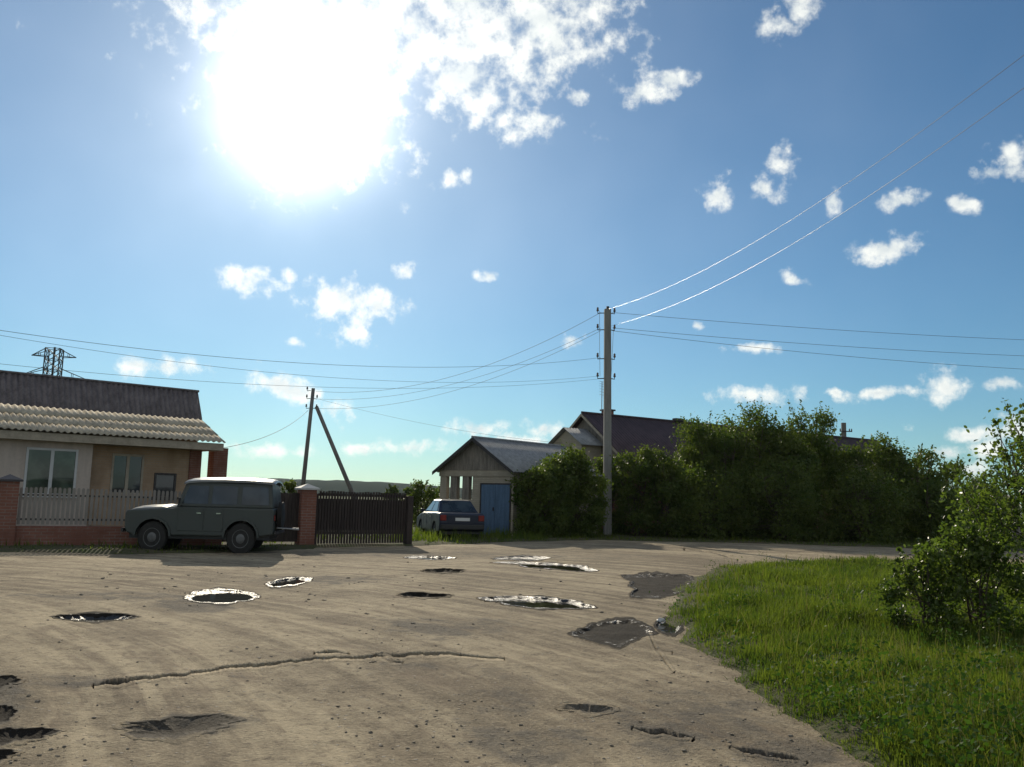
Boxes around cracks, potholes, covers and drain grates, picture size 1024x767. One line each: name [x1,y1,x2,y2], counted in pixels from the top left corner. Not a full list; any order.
pothole [182,586,262,606]
pothole [476,595,598,611]
crack [94,648,504,690]
pothole [0,700,23,726]
crack [646,632,675,673]
pothole [489,561,600,572]
pothole [0,671,27,694]
pothole [0,723,67,748]
pothole [490,554,551,562]
pothole [554,698,621,718]
pothole [49,611,141,624]
